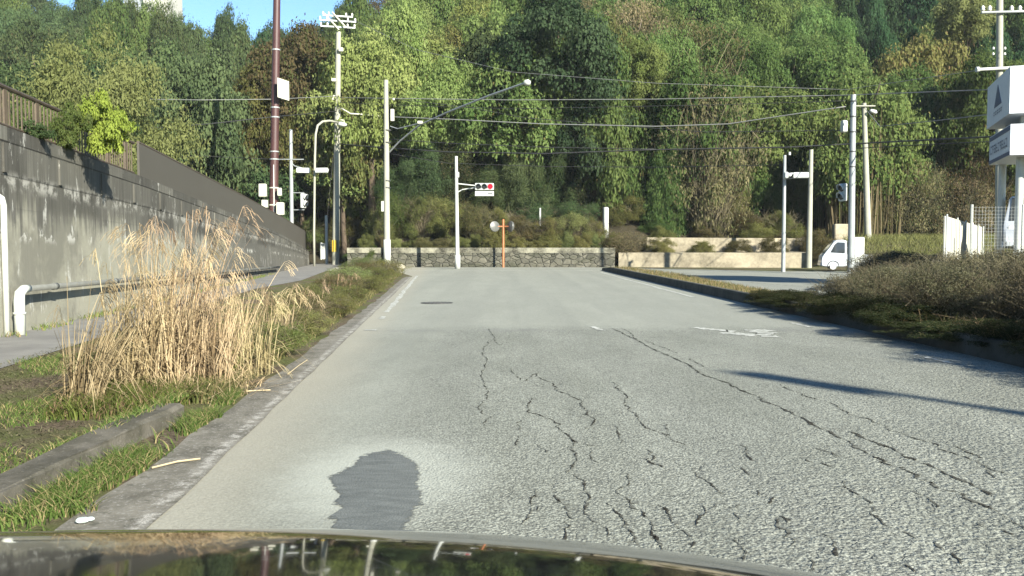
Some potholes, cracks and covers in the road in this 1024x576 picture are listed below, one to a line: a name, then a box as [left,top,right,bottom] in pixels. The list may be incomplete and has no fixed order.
crack [511,370,839,573]
crack [905,542,965,572]
crack [806,443,916,538]
crack [478,329,507,426]
crack [780,384,1024,479]
